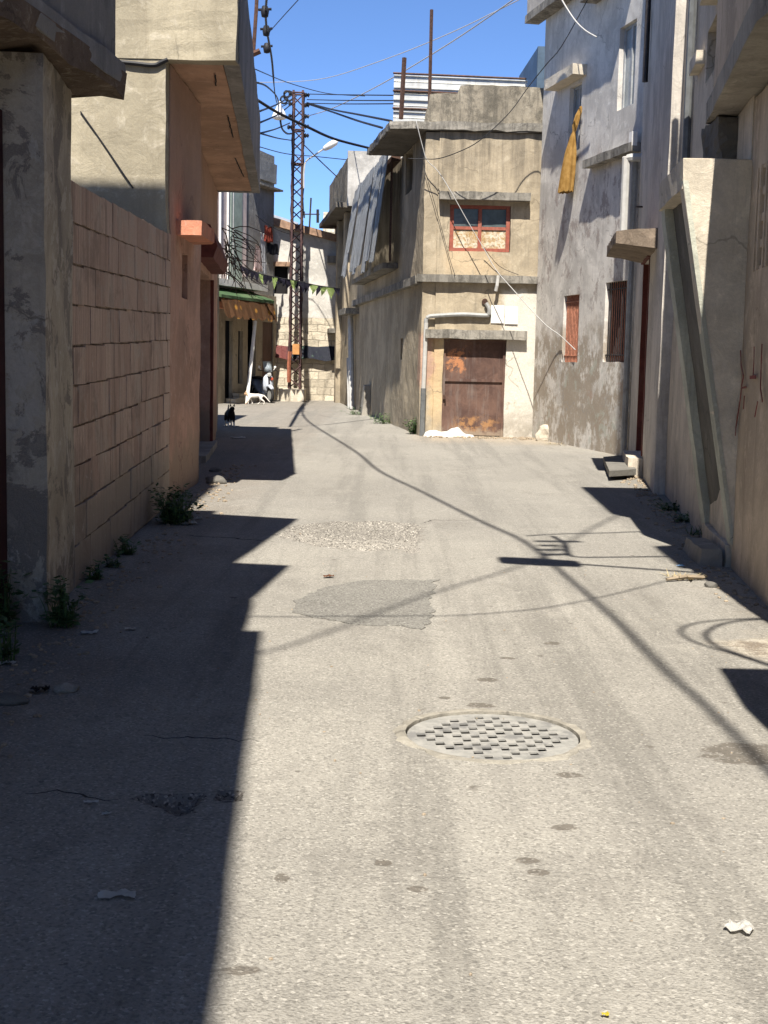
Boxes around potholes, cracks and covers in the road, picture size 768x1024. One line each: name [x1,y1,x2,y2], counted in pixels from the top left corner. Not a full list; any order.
manhole cover [392,708,592,764]
crack [27,789,118,801]
pothole [130,792,207,817]
pothole [213,790,245,803]
